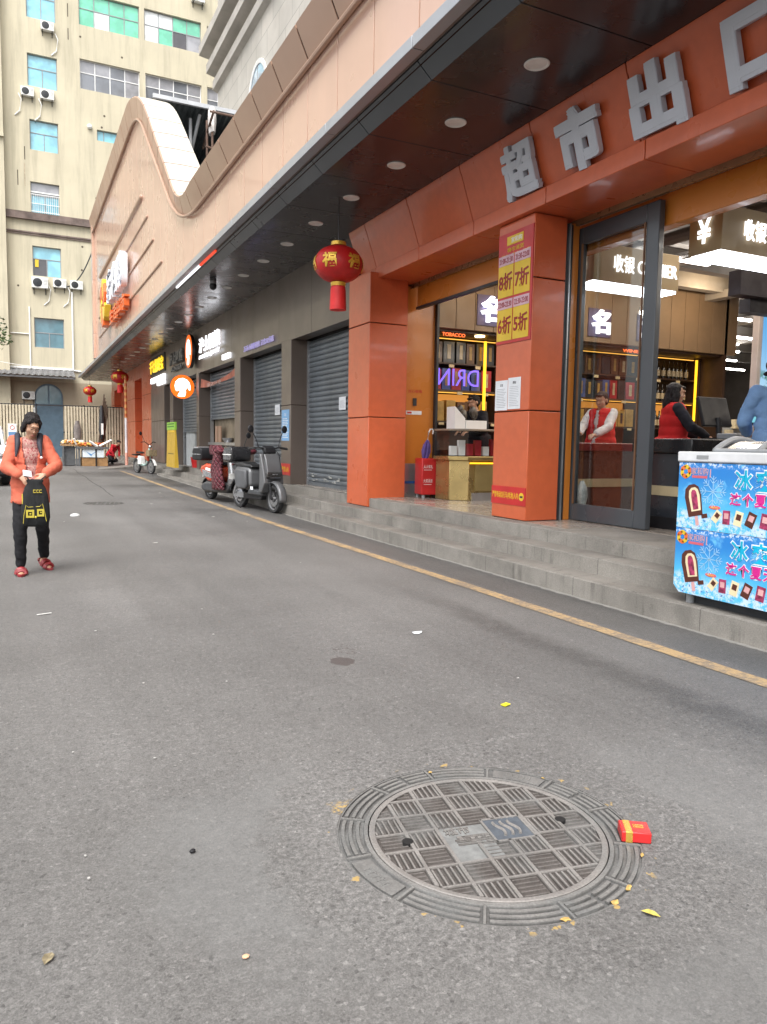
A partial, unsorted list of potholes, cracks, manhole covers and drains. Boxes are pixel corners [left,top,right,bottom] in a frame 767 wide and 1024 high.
manhole cover [336,767,644,927]
